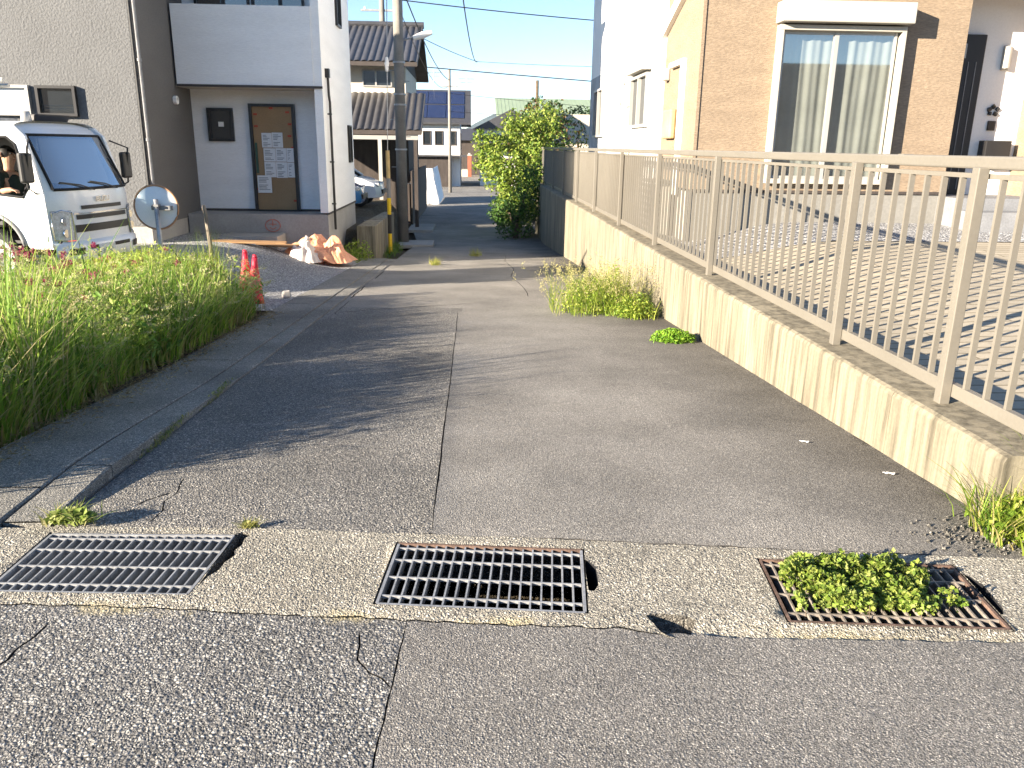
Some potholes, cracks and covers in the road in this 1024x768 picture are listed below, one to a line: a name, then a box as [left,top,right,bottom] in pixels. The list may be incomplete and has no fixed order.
crack [0,621,50,665]
drain grate [757,558,1015,632]
pothole [646,613,696,638]
crack [137,478,184,523]
drain grate [373,542,589,628]
drain grate [0,532,240,610]
crack [356,620,408,768]
